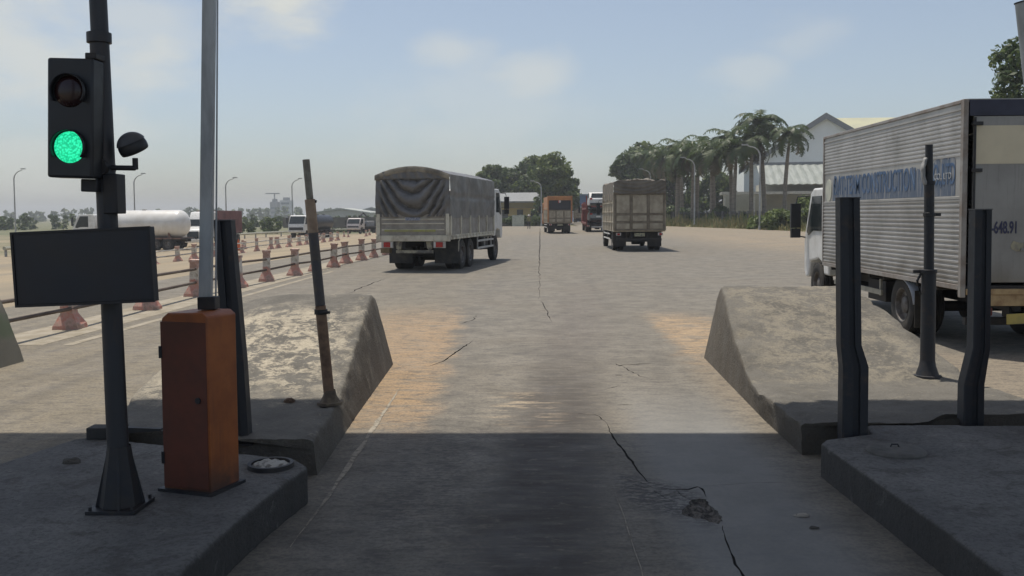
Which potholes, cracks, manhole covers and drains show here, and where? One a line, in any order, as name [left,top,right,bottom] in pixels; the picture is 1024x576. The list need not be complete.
manhole cover [866,443,928,460]
pothole [681,498,722,524]
crack [574,413,775,576]
